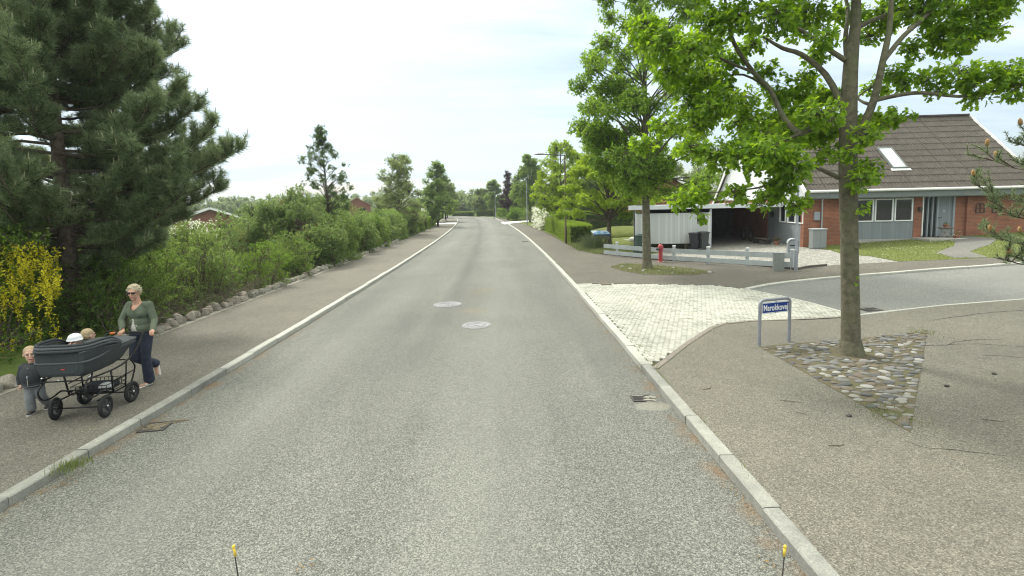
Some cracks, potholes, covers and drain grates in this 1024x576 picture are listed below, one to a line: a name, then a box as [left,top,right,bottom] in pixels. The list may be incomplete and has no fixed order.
drain grate [136,419,189,433]
drain grate [630,394,656,402]
manhole cover [462,321,491,329]
crack [926,339,1024,358]
